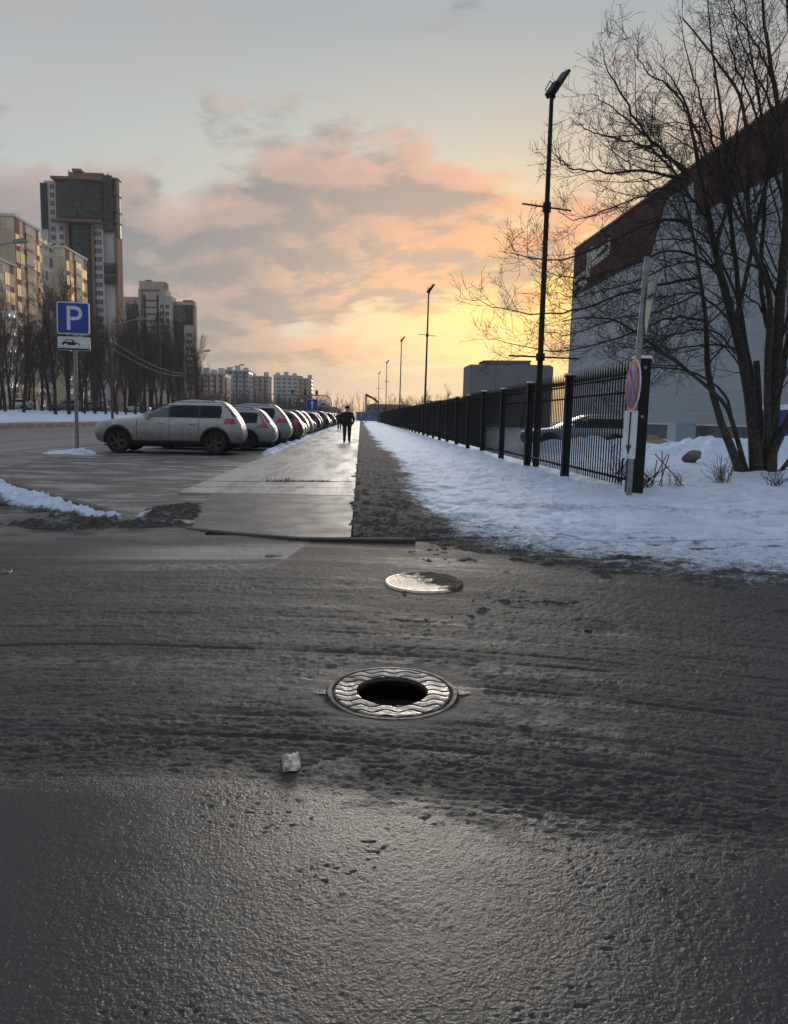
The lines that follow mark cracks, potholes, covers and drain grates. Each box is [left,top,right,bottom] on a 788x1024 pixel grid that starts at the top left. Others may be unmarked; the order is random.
manhole cover [385,571,463,594]
manhole cover [313,667,471,720]
